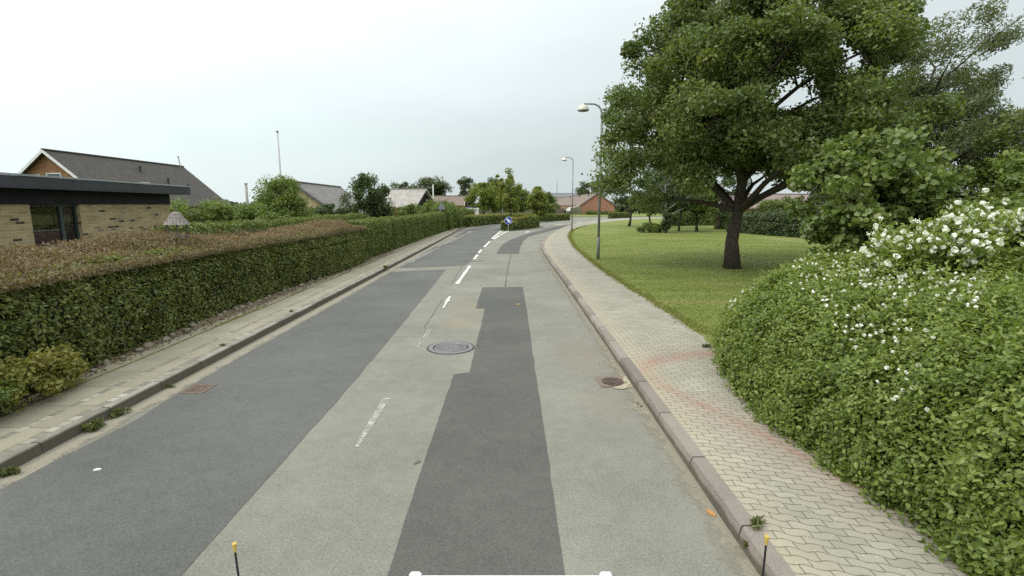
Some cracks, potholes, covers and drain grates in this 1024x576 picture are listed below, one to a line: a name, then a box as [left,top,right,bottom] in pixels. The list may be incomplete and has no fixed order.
manhole cover [427,341,475,354]
drain grate [595,376,630,387]
